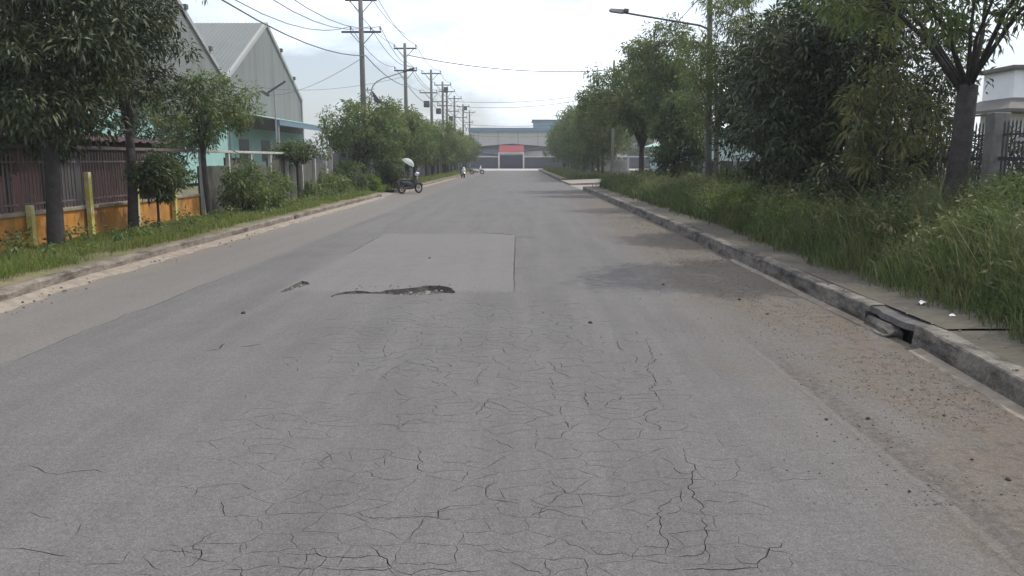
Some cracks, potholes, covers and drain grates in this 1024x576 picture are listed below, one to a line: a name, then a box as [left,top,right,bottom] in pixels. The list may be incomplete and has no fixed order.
pothole [331,286,455,297]
drain grate [864,305,962,344]
crack [39,299,911,576]
pothole [281,281,309,292]
